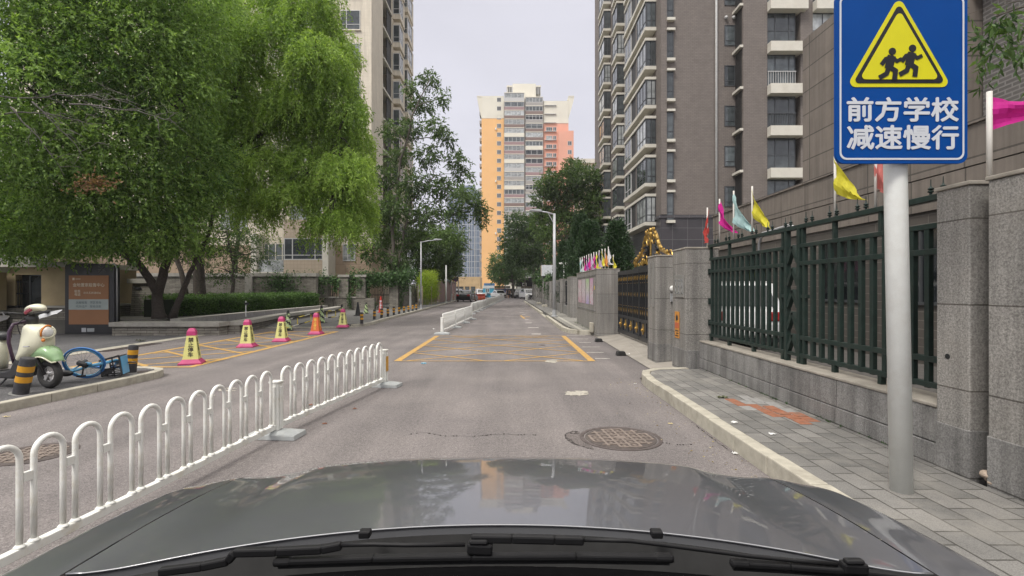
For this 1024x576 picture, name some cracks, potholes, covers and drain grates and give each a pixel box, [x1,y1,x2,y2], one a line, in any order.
manhole cover [580,427,663,451]
manhole cover [0,442,80,466]
